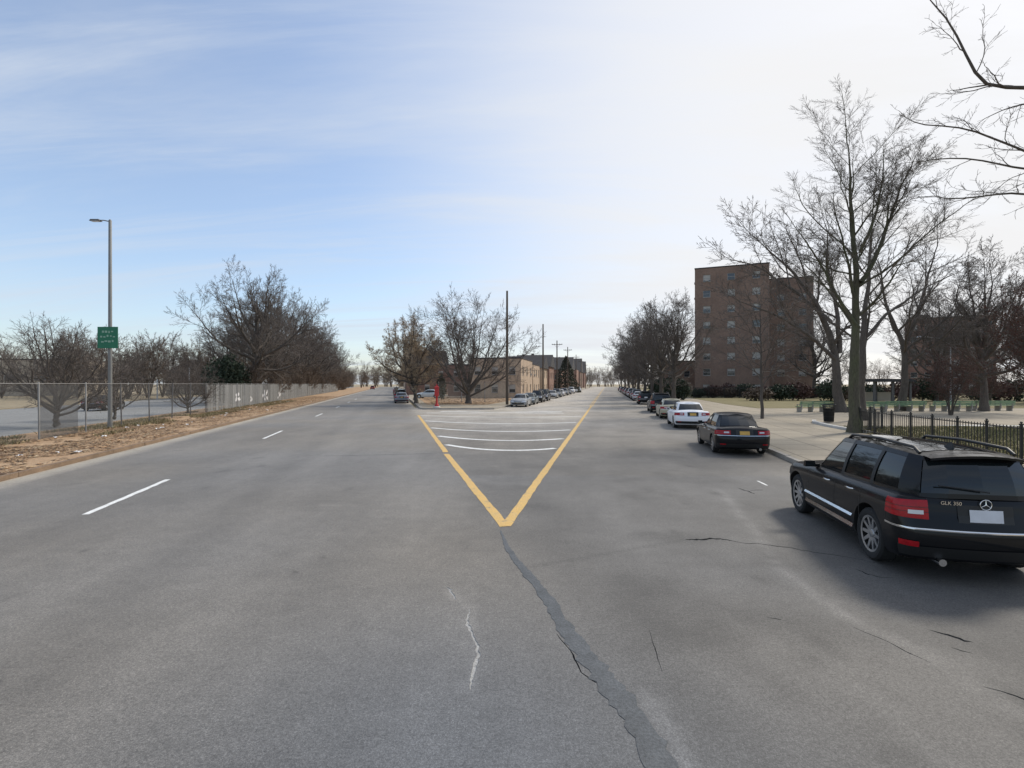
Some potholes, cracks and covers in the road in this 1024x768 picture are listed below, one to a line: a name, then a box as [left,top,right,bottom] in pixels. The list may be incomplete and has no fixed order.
crack [686,538,889,578]
crack [557,634,596,683]
crack [447,587,481,689]
crack [927,629,971,653]
